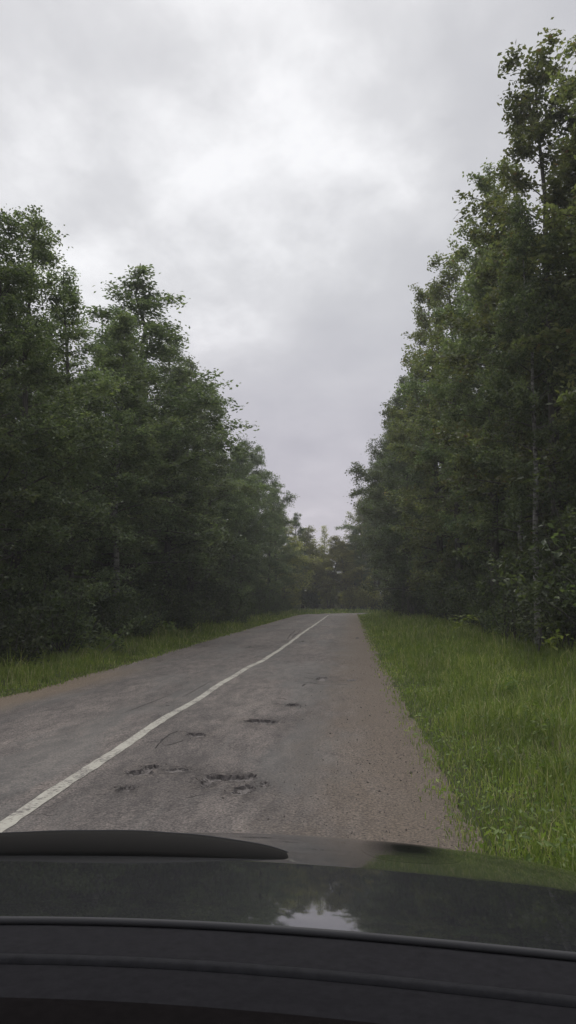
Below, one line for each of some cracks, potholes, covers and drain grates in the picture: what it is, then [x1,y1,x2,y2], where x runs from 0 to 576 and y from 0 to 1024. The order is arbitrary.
pothole [199,773,257,789]
pothole [230,784,257,795]
pothole [125,764,159,776]
crack [151,731,188,748]
